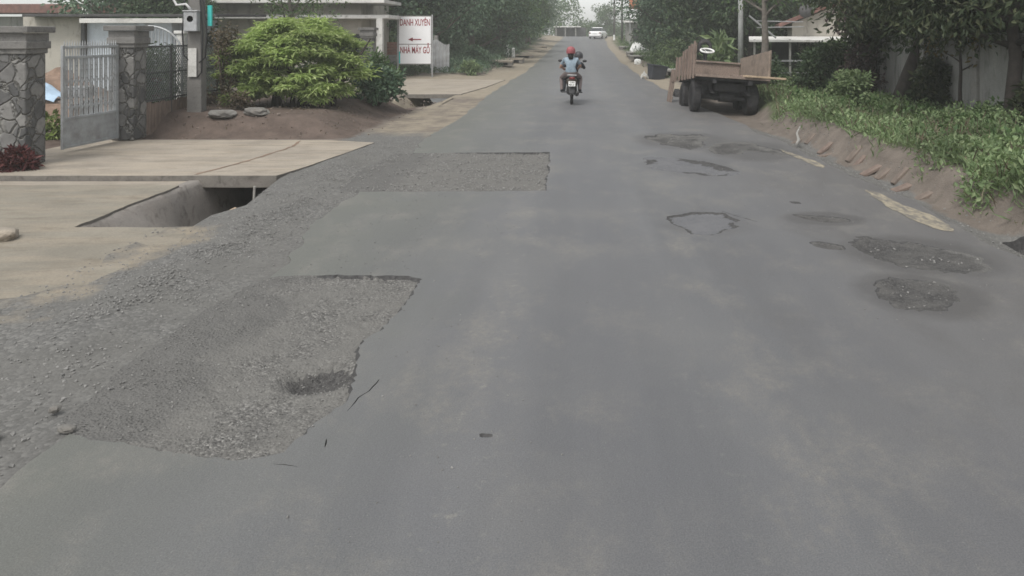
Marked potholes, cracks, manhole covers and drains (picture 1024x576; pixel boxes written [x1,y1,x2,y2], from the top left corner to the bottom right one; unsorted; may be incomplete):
pothole [667,212,740,235]
crack [197,141,300,174]
pothole [643,156,739,176]
pothole [61,274,422,461]
